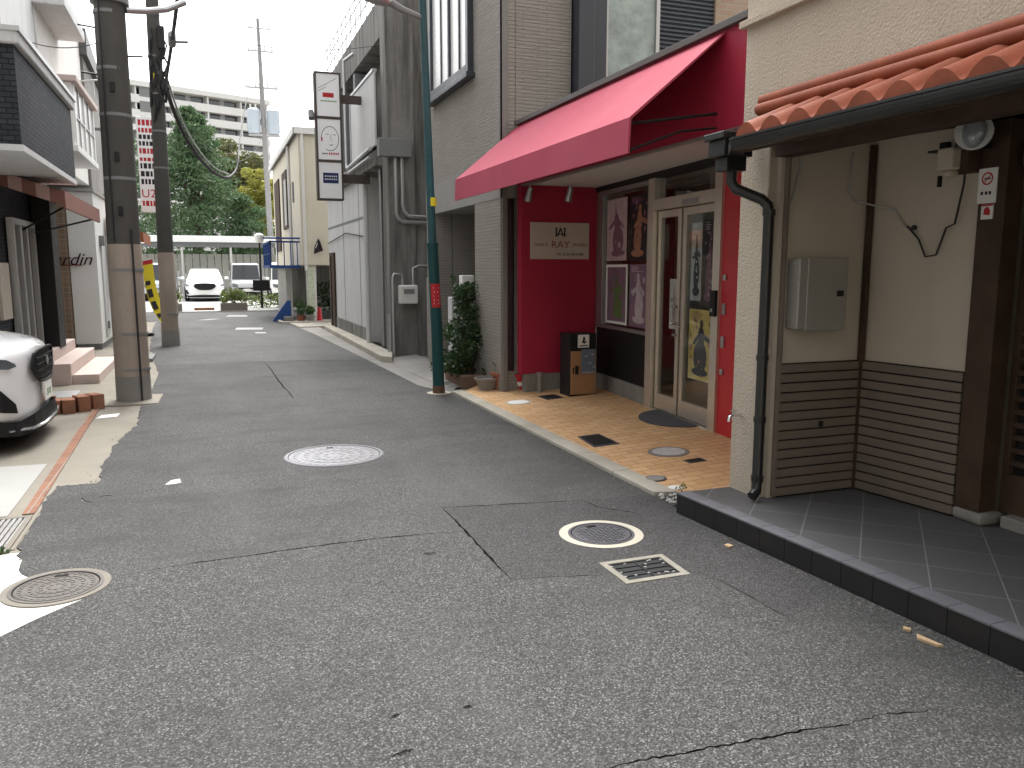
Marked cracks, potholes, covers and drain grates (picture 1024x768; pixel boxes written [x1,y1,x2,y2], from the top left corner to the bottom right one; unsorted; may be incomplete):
manhole cover [577,433,620,447]
manhole cover [559,520,644,548]
drain grate [0,515,33,555]
manhole cover [648,447,690,457]
manhole cover [0,568,112,608]
manhole cover [284,444,384,467]
drain grate [599,554,690,584]
crack [709,577,795,622]
crack [611,709,929,768]
